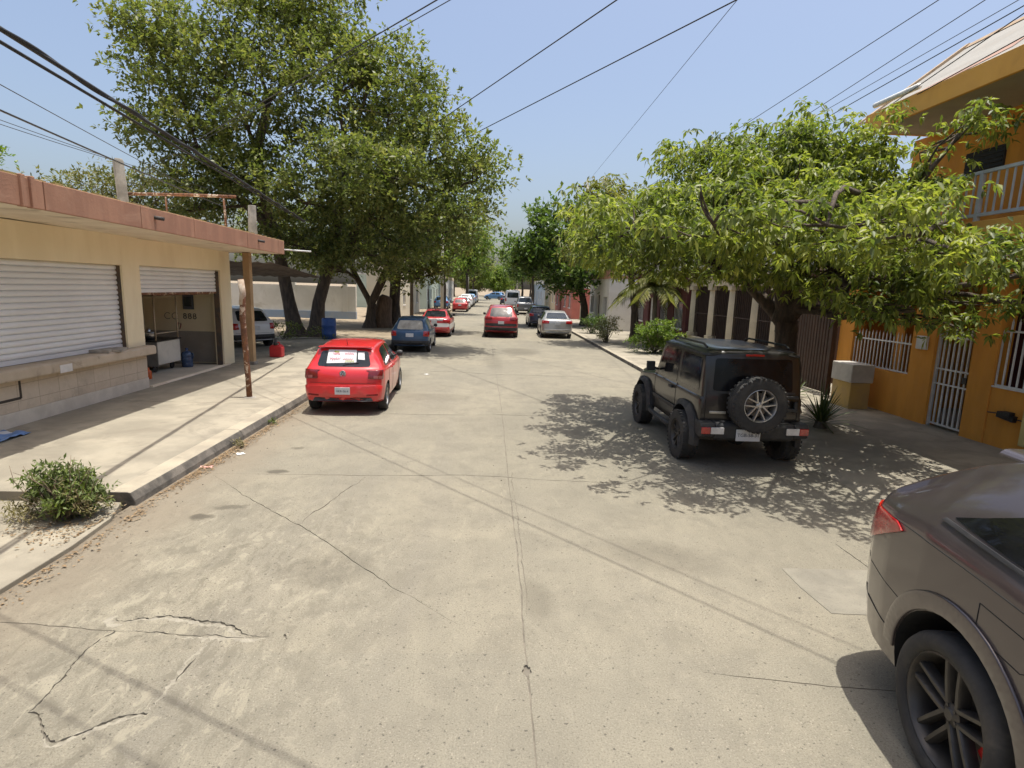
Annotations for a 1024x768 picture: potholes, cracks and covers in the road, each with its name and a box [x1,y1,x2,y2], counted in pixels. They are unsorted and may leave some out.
crack [28,615,287,748]
crack [215,476,457,624]
